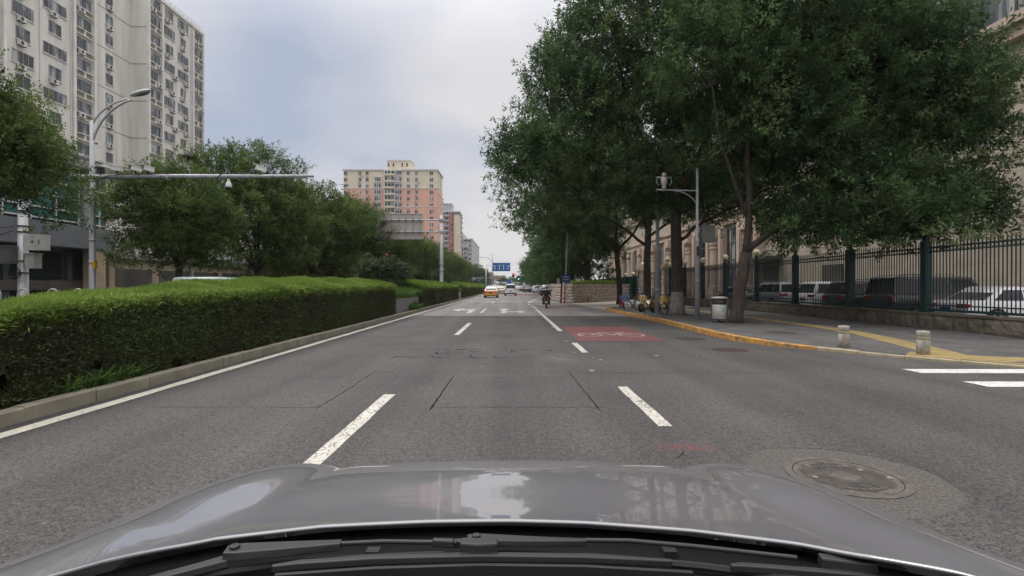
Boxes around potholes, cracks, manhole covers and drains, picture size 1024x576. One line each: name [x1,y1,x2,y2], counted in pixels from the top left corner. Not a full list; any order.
manhole cover [745,448,967,518]
crack [256,349,601,411]
